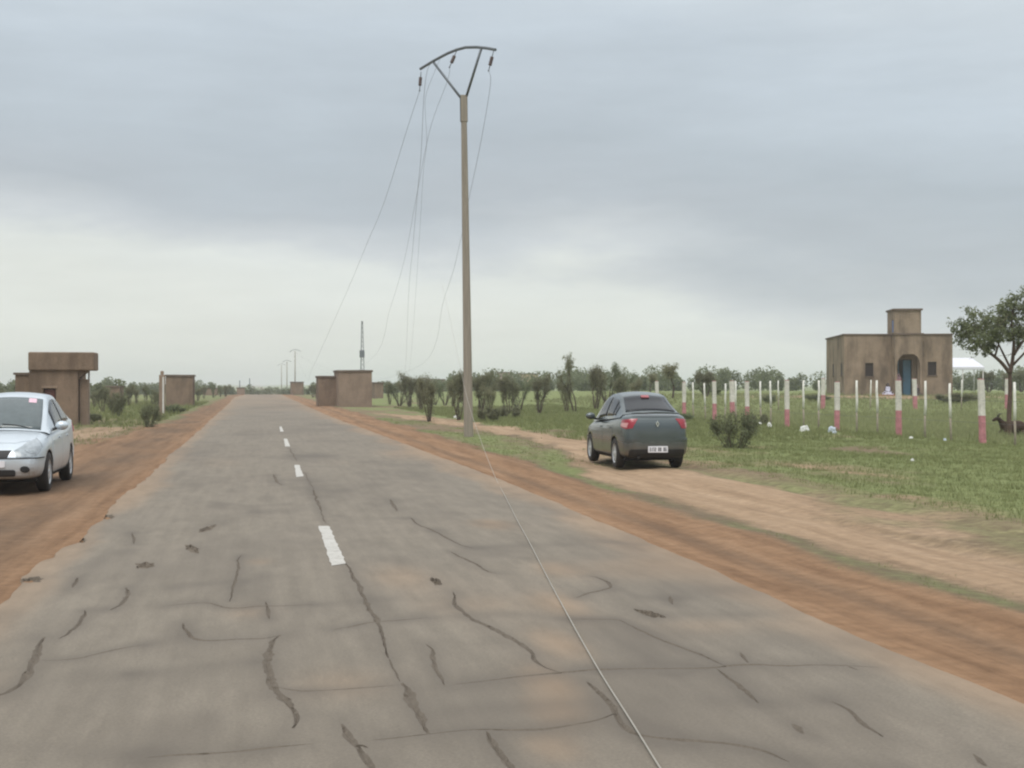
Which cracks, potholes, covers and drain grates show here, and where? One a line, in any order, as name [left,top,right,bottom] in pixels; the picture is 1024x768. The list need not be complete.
crack [111,587,131,610]
crack [0,610,141,695]
crack [390,499,492,573]
crack [973,754,988,767]
crack [145,555,878,768]
crack [273,448,326,523]
